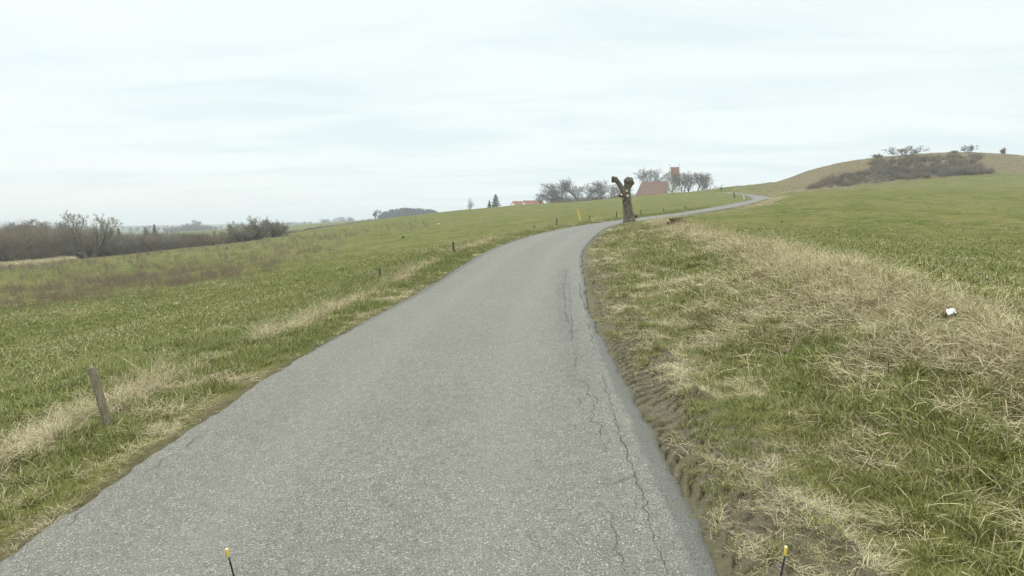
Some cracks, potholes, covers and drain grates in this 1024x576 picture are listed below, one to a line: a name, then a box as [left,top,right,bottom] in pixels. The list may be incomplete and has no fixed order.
crack [557,272,669,574]
